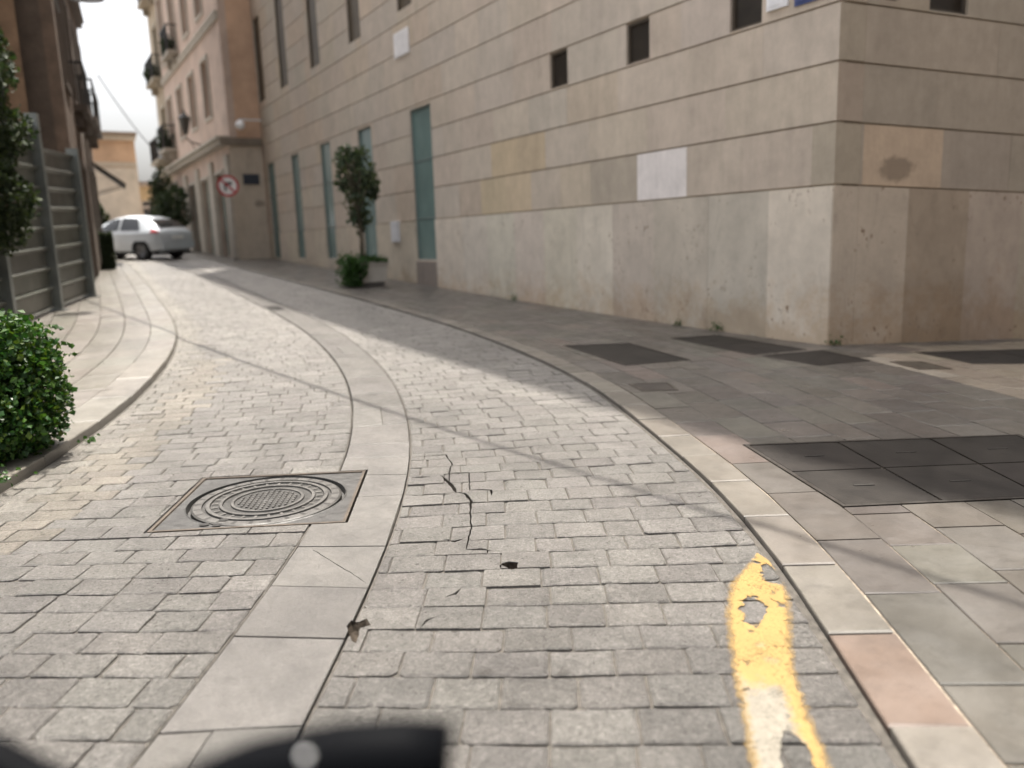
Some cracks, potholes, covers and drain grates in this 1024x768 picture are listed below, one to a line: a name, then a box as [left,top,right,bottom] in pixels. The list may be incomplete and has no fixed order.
utility cover [672,335,807,355]
utility cover [564,343,690,366]
crack [419,455,493,552]
utility cover [629,382,678,391]
utility cover [743,434,1024,509]
manhole cover [147,470,366,534]
utility cover [916,349,1024,364]
utility cover [762,350,870,366]
